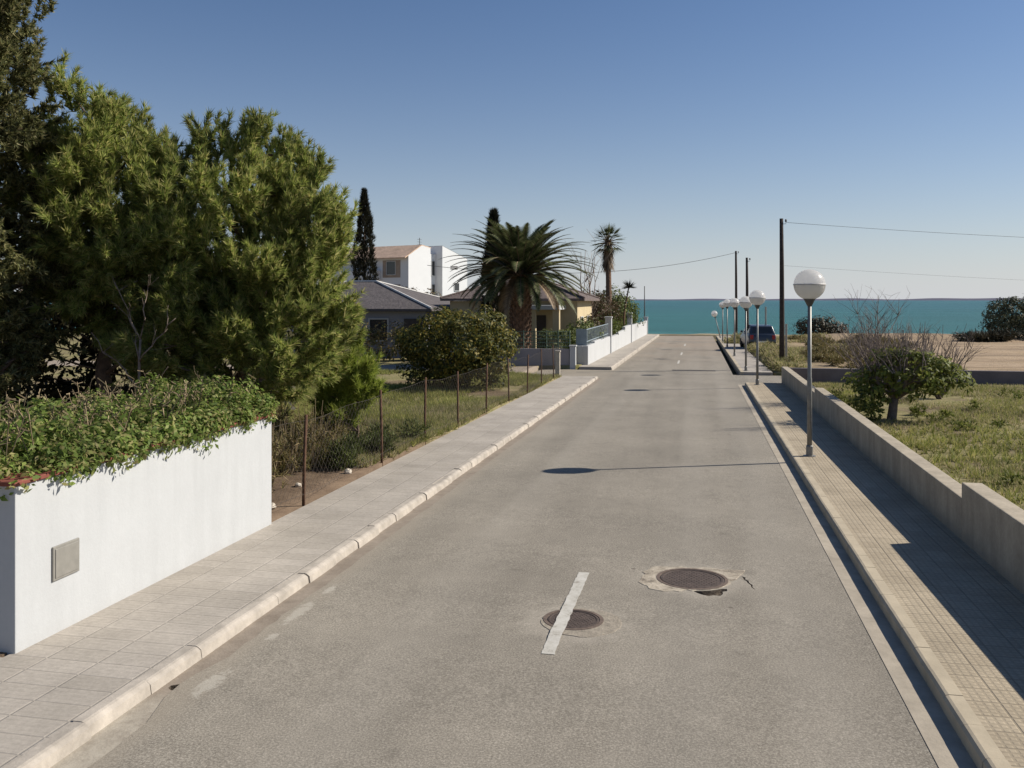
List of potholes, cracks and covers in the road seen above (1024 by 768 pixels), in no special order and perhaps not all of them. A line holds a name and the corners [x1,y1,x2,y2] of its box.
manhole cover [639,566,745,592]
manhole cover [541,608,622,638]
